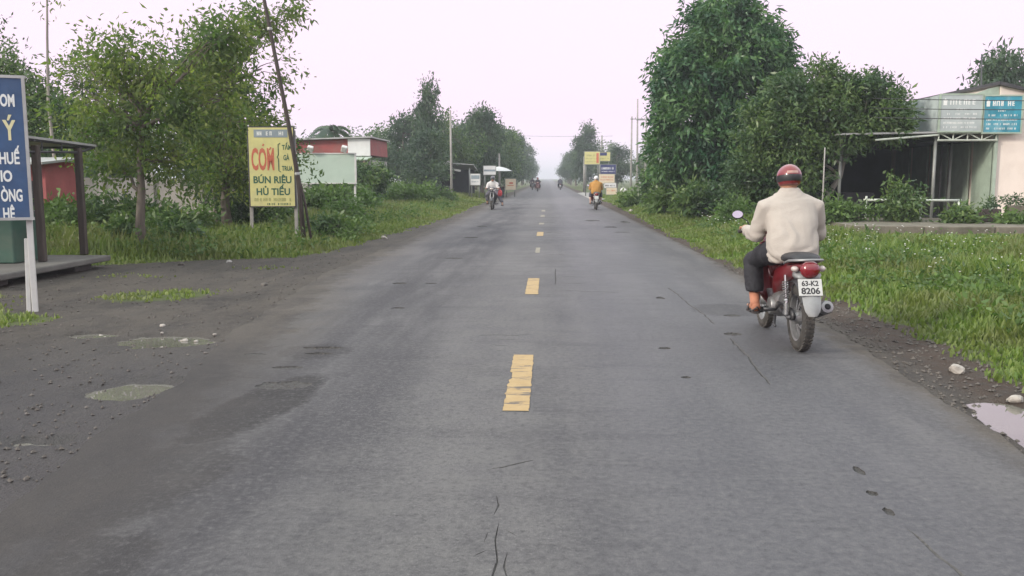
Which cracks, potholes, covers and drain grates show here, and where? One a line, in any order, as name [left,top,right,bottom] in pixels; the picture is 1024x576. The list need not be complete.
crack [668,288,770,385]
crack [907,529,964,576]
crack [474,495,515,576]
